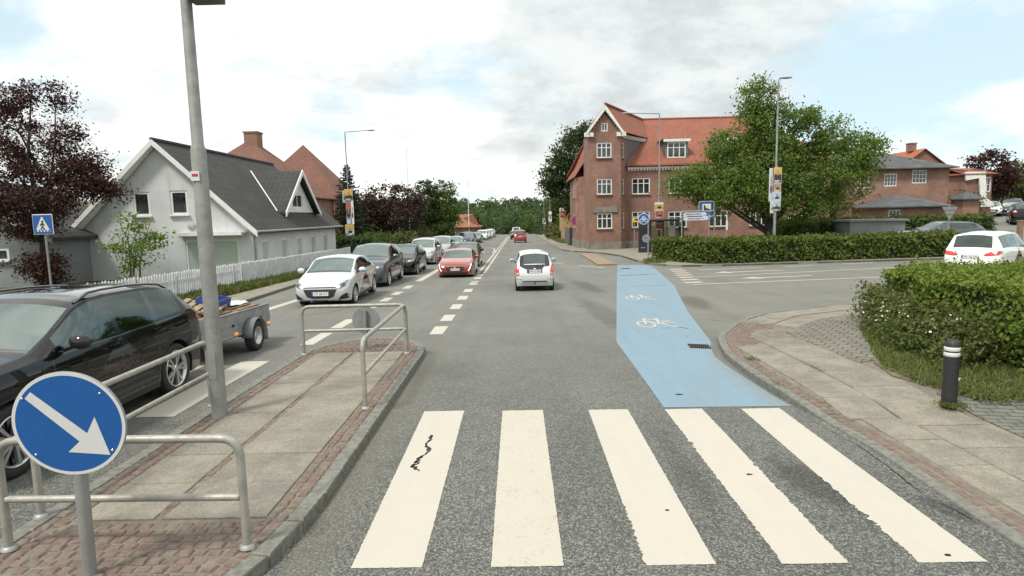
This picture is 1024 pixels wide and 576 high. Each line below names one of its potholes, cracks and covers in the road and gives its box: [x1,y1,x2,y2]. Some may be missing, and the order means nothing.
crack [410,435,433,471]
